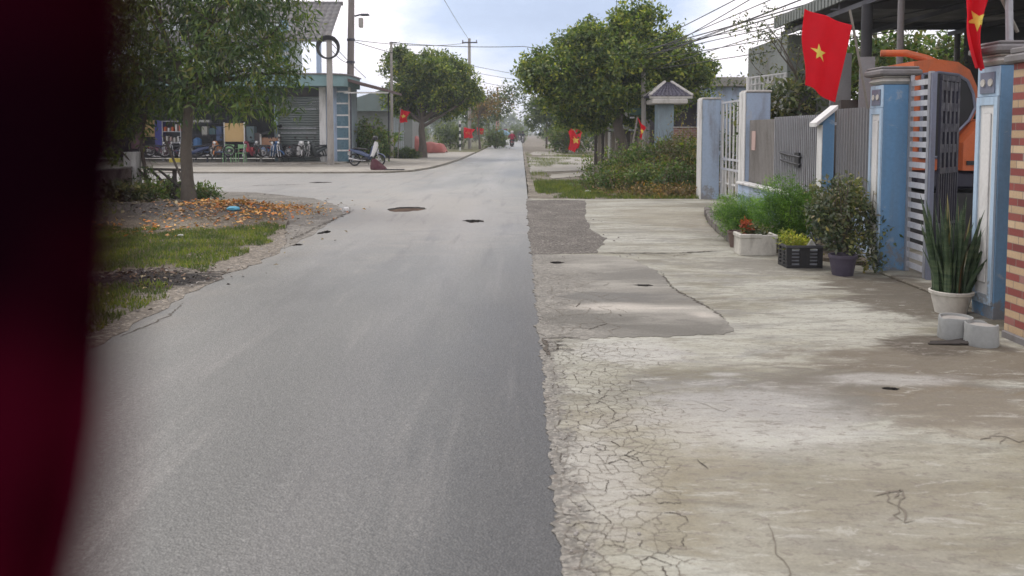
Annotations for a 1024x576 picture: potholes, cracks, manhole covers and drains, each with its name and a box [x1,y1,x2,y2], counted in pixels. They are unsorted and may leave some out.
crack [542,273,692,576]
crack [768,523,791,576]
crack [875,489,914,523]
